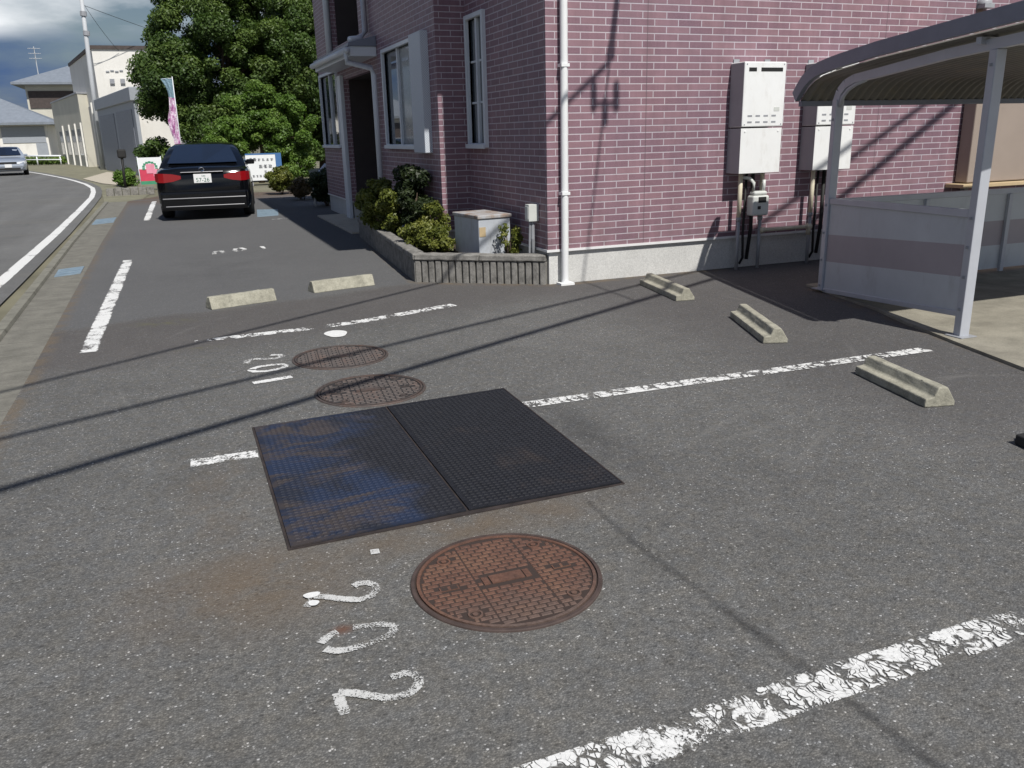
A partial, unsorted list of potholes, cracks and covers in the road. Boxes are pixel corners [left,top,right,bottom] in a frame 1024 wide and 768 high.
manhole cover [314,374,426,408]
utility cover [252,388,625,551]
manhole cover [292,345,388,370]
manhole cover [410,533,603,633]
